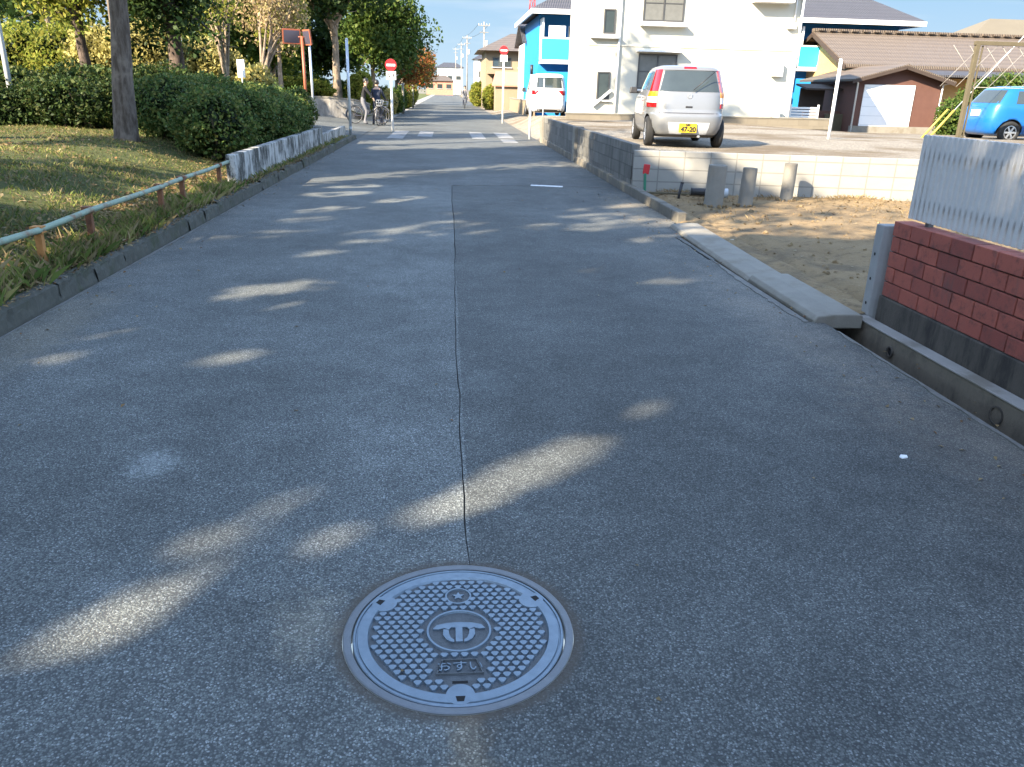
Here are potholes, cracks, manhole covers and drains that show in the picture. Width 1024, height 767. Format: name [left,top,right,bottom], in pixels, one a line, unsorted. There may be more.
manhole cover [342,565,573,716]
